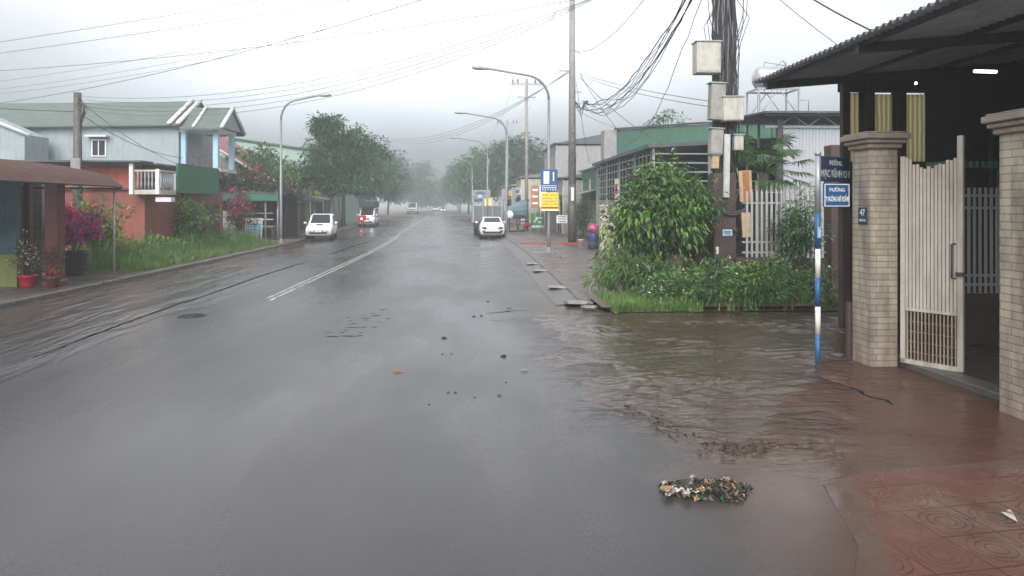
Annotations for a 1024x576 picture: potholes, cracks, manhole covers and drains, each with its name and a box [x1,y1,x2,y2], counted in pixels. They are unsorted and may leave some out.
crack [816,376,893,405]
